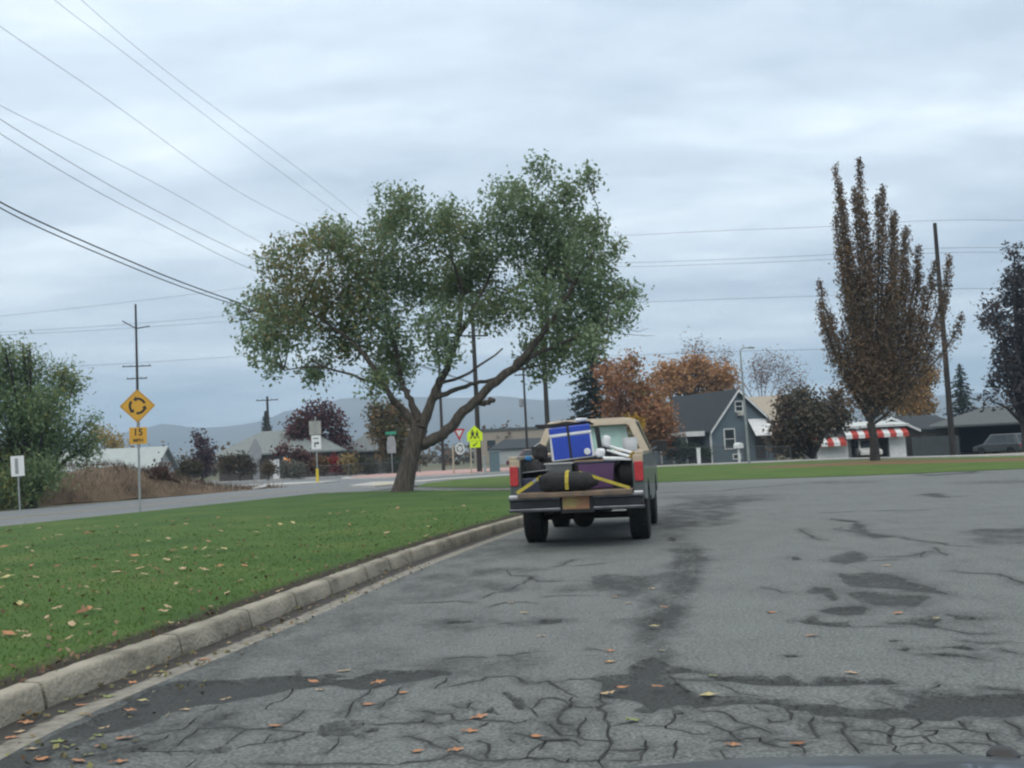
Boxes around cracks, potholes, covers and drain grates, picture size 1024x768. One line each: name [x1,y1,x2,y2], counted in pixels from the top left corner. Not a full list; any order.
crack [117,676,1024,768]
crack [899,537,1024,584]
crack [483,560,603,624]
crack [939,628,1015,653]
